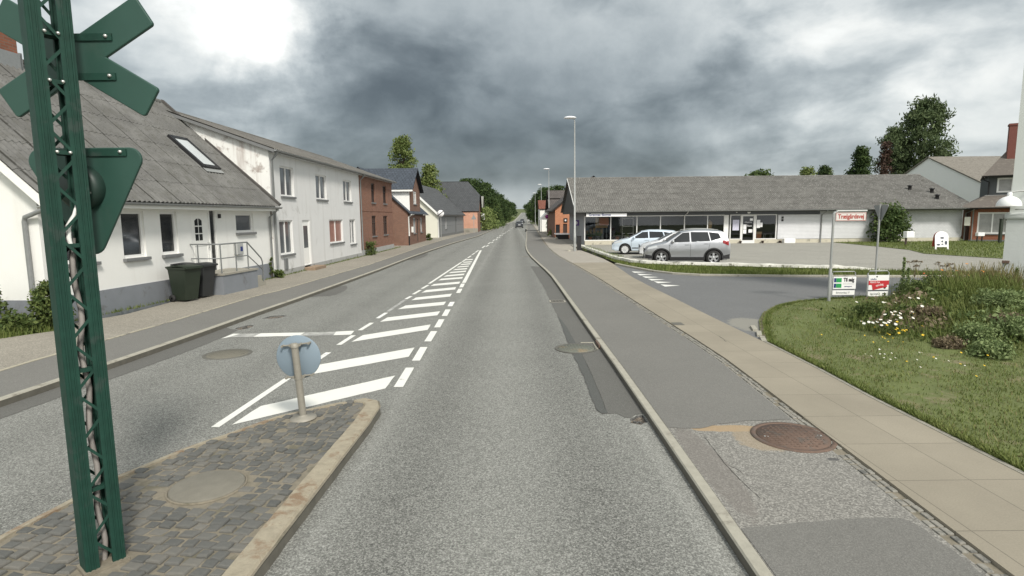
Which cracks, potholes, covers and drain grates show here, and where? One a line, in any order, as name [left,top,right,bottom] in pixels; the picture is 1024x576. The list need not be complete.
manhole cover [750,422,838,453]
manhole cover [202,349,253,360]
manhole cover [555,343,597,353]
manhole cover [165,470,248,505]
